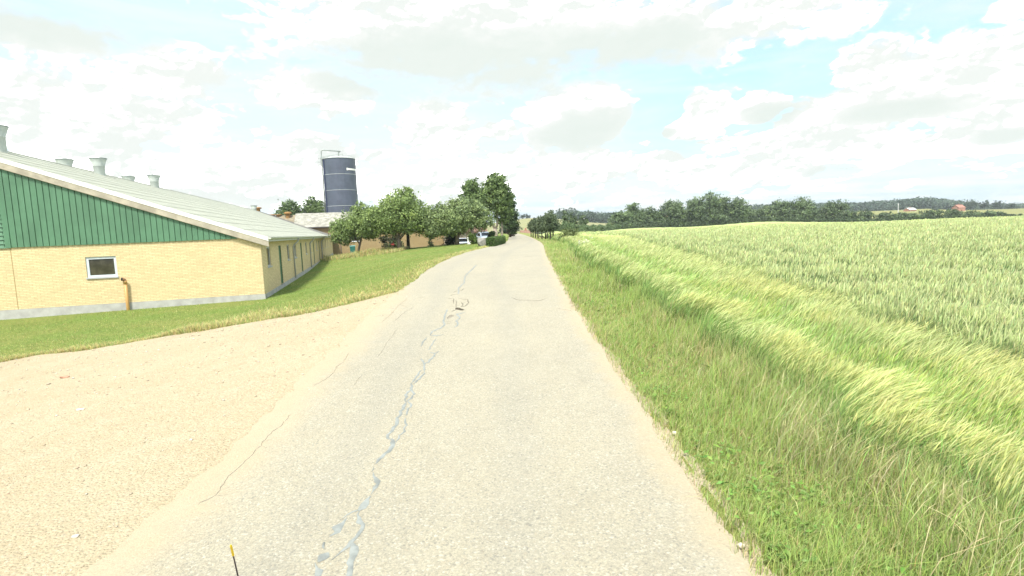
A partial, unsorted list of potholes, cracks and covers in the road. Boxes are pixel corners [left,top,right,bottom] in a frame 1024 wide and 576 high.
crack [200,414,291,503]
crack [375,297,424,356]
